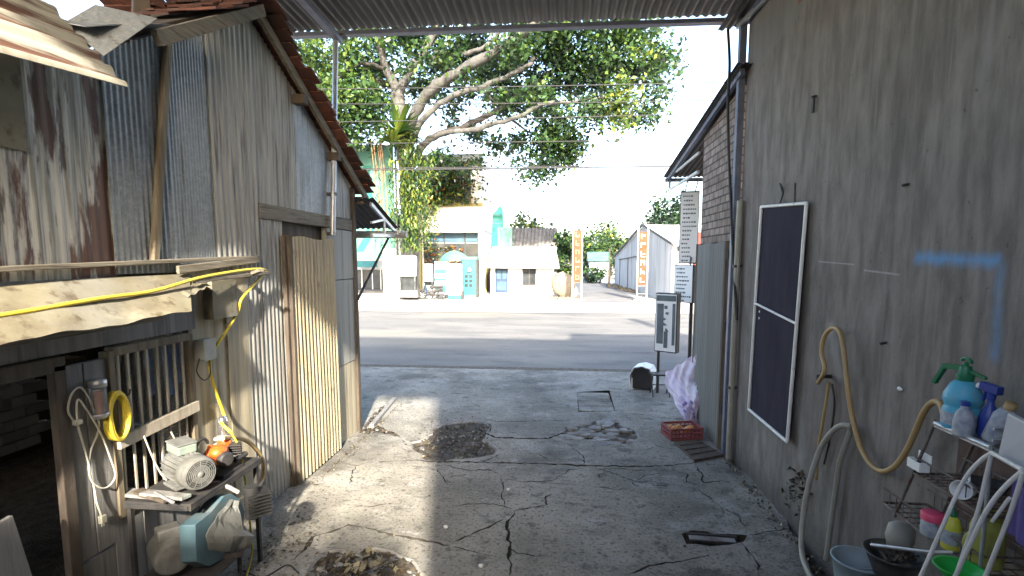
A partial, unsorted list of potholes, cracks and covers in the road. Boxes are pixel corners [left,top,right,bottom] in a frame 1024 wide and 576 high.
pothole [558,418,640,446]
manhole cover [577,392,615,412]
pothole [405,416,510,464]
pothole [304,546,428,576]
crack [294,451,783,575]
